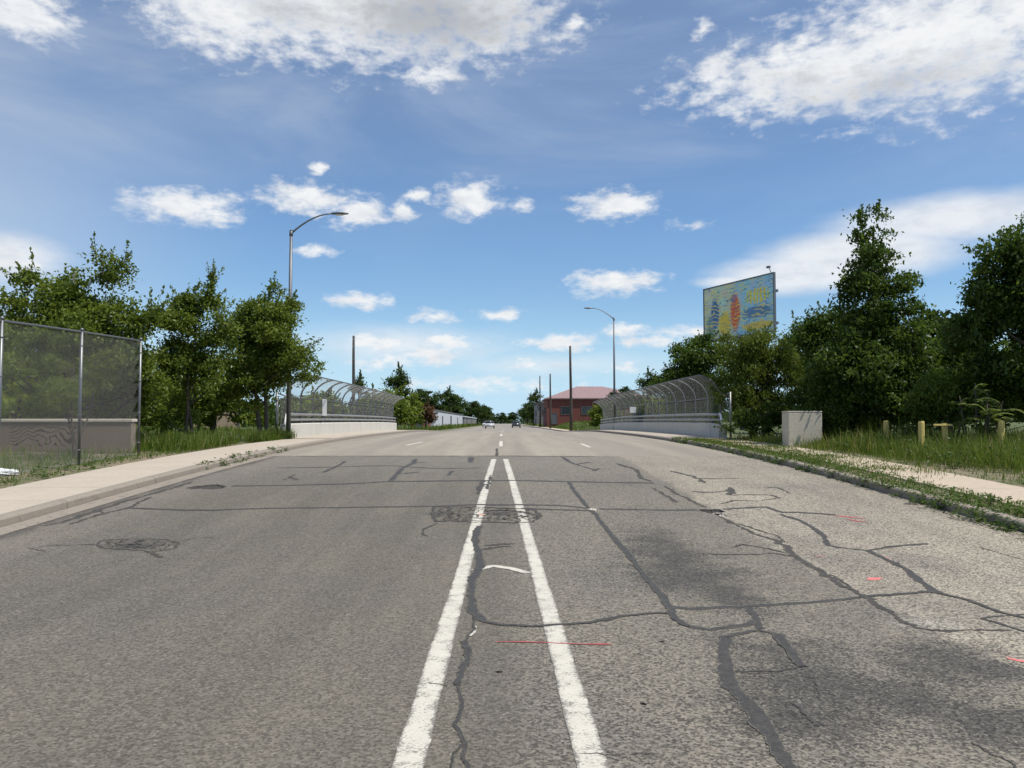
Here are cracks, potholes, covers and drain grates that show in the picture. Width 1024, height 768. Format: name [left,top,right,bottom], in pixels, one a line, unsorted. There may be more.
crack [971,742,1017,768]
crack [29,457,1010,768]
